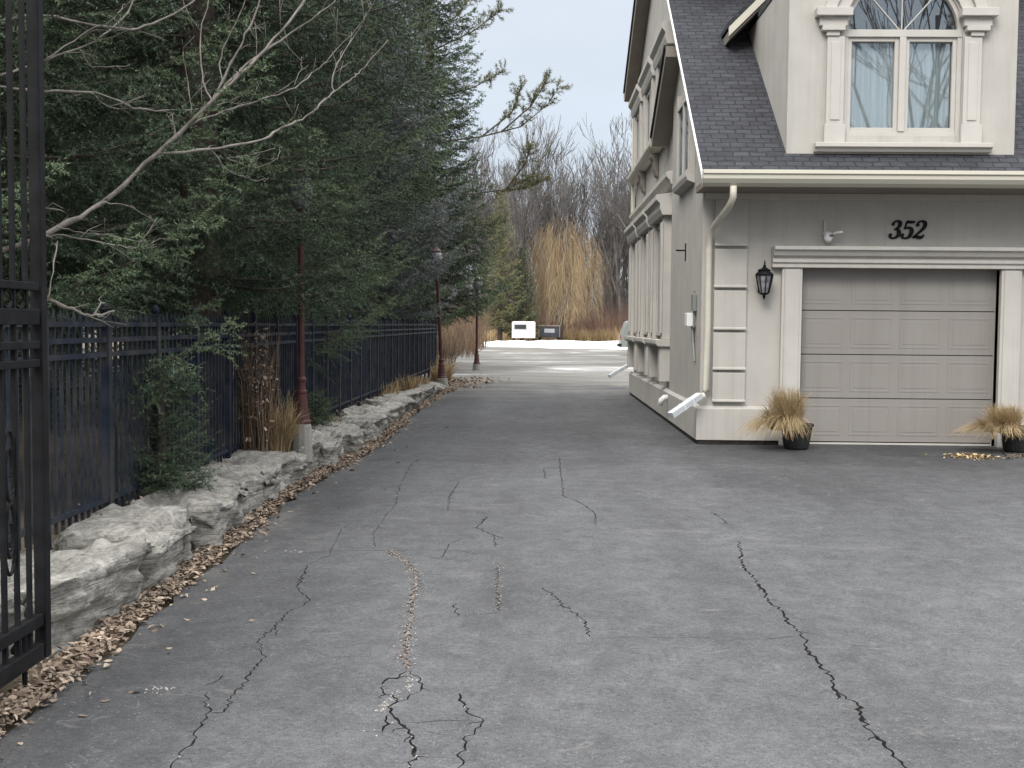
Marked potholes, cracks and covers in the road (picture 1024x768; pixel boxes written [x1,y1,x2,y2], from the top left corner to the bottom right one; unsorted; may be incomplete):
crack [543,459,597,524]
crack [542,588,714,638]
crack [170,458,507,768]
crack [737,541,907,768]
